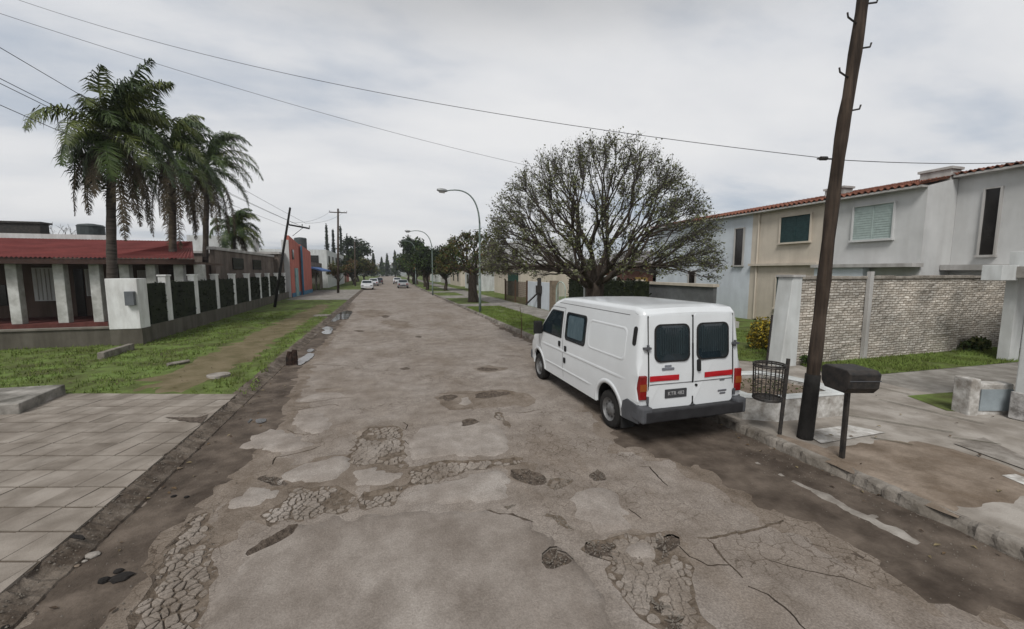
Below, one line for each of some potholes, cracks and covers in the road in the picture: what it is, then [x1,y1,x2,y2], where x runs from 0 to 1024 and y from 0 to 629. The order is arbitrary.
crack [260,423,523,527]
crack [545,509,874,629]
pothole [542,549,571,569]
pothole [589,470,606,481]
pothole [510,469,547,485]
pothole [246,524,298,556]
pothole [656,536,680,557]
pothole [475,391,511,399]
